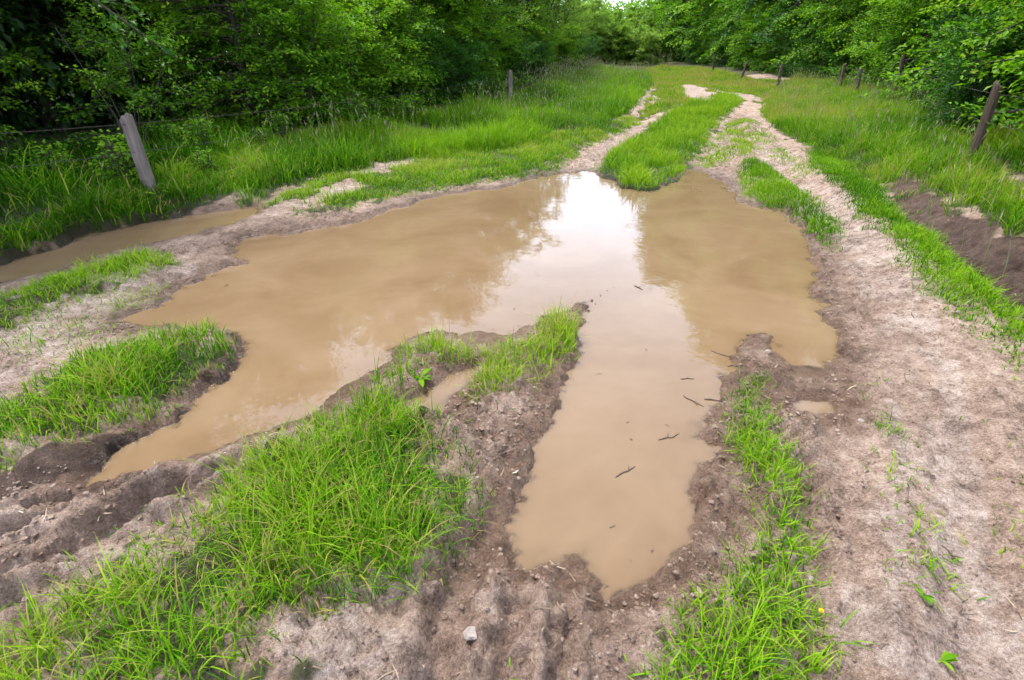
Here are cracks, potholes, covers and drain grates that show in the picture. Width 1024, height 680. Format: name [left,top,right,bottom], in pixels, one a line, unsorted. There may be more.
pothole [77,167,851,606]
